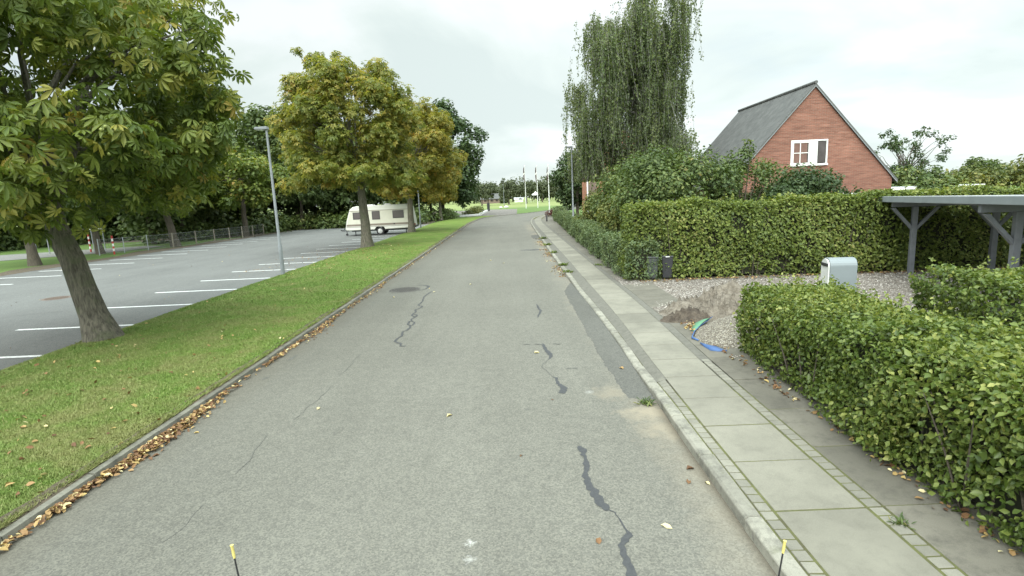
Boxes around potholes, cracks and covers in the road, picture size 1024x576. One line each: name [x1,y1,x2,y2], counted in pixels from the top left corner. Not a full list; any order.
crack [163,363,353,542]
